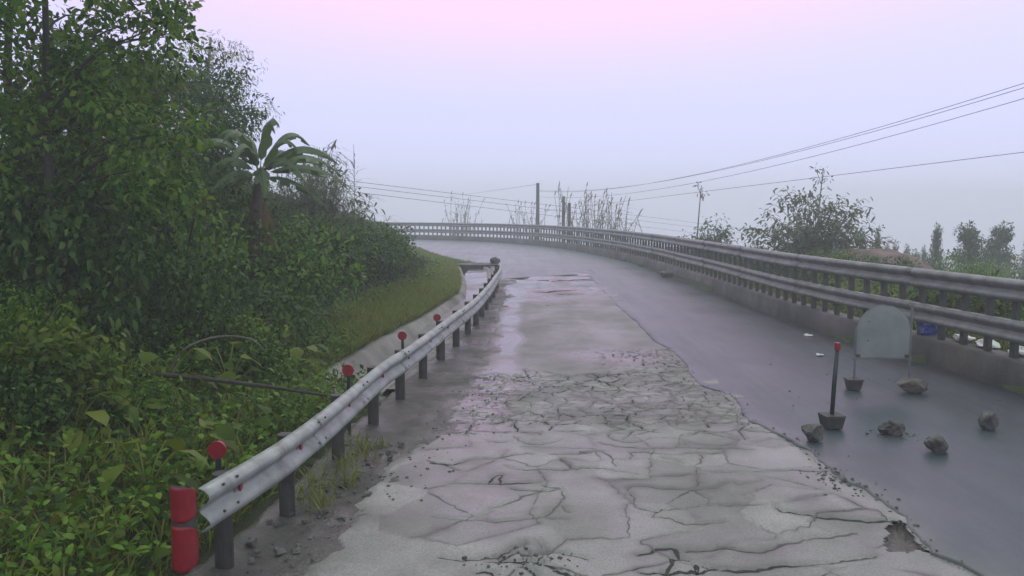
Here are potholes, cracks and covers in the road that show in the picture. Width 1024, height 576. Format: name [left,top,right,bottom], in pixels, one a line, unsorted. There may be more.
crack [379,349,930,576]
pothole [883,522,929,553]
